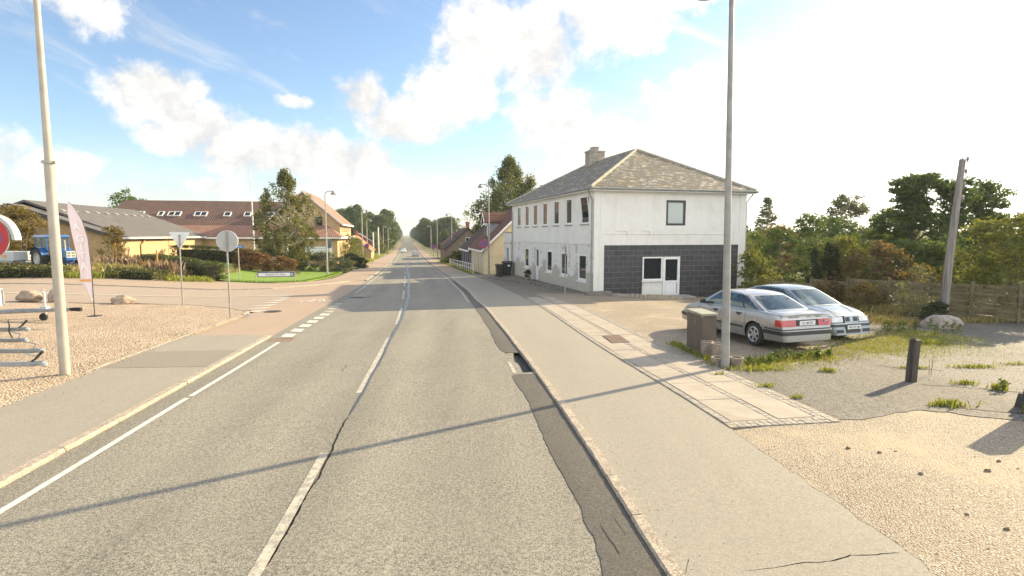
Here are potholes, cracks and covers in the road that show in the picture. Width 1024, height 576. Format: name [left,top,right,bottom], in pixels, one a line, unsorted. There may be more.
crack [748,552,896,571]
manhole cover [603,334,629,343]
crack [266,261,410,566]
pothole [513,353,533,373]
